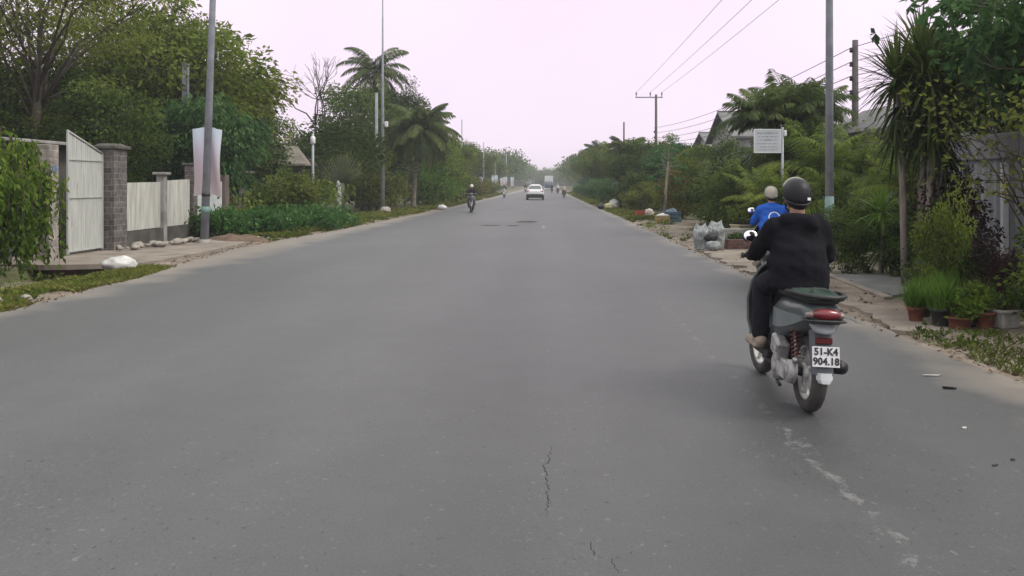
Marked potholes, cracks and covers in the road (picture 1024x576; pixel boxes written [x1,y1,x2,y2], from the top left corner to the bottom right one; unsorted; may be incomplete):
crack [542,449,552,516]
